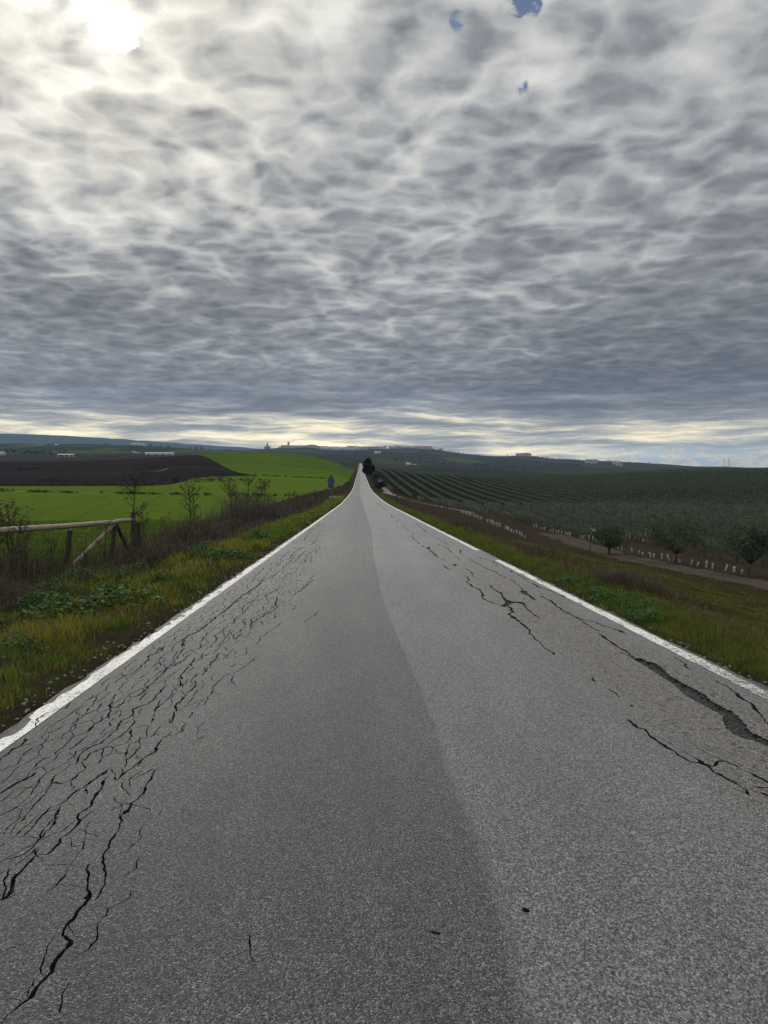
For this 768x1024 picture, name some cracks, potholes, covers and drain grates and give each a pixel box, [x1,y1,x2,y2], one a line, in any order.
crack [626,679,768,796]
crack [0,523,329,1023]
crack [376,502,565,653]
